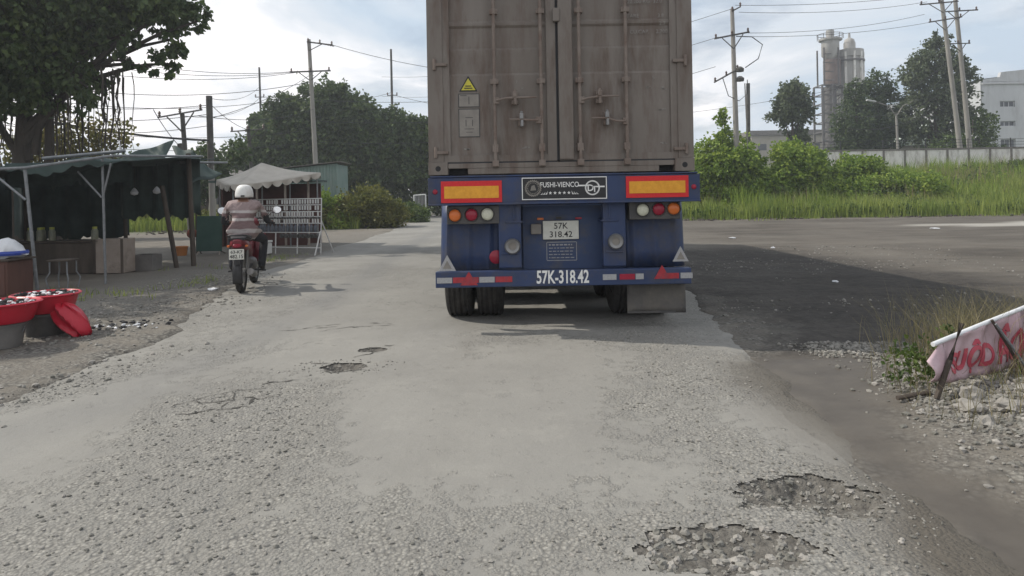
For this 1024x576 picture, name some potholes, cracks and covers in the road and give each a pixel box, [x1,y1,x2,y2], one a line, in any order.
pothole [732,473,891,523]
crack [175,345,392,414]
pothole [632,522,835,576]
pothole [319,363,368,372]
